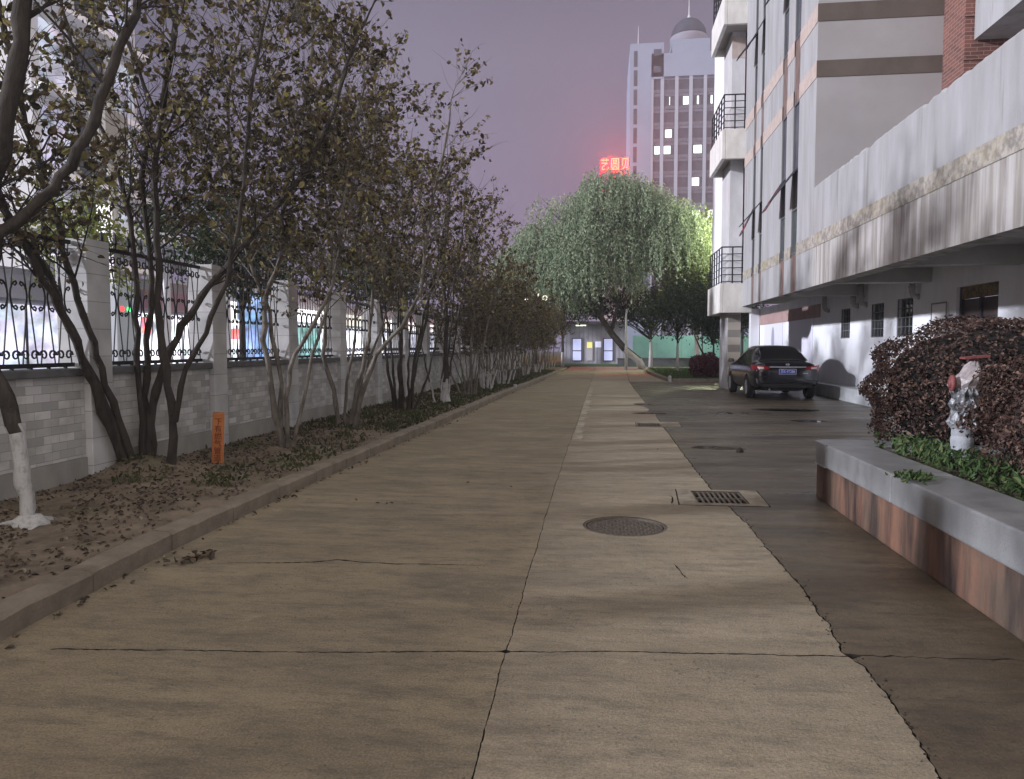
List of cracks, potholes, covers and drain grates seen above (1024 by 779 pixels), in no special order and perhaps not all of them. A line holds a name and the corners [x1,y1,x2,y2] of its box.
drain grate [676,489,769,507]
manhole cover [583,517,667,537]
